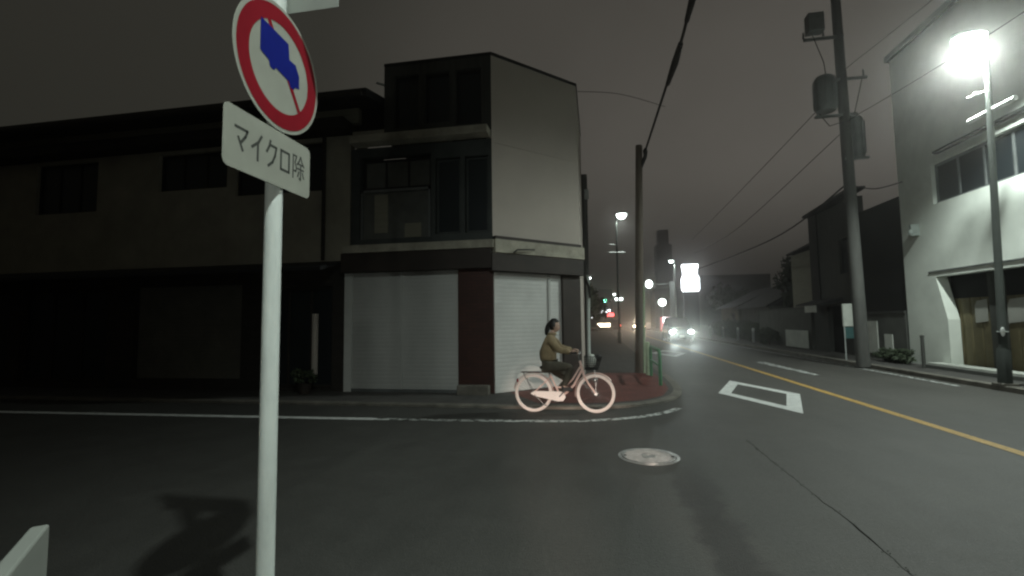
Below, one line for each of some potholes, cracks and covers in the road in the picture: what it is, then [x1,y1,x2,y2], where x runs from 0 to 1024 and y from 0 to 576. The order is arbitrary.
crack [749,442,916,576]
manhole cover [618,448,680,465]
